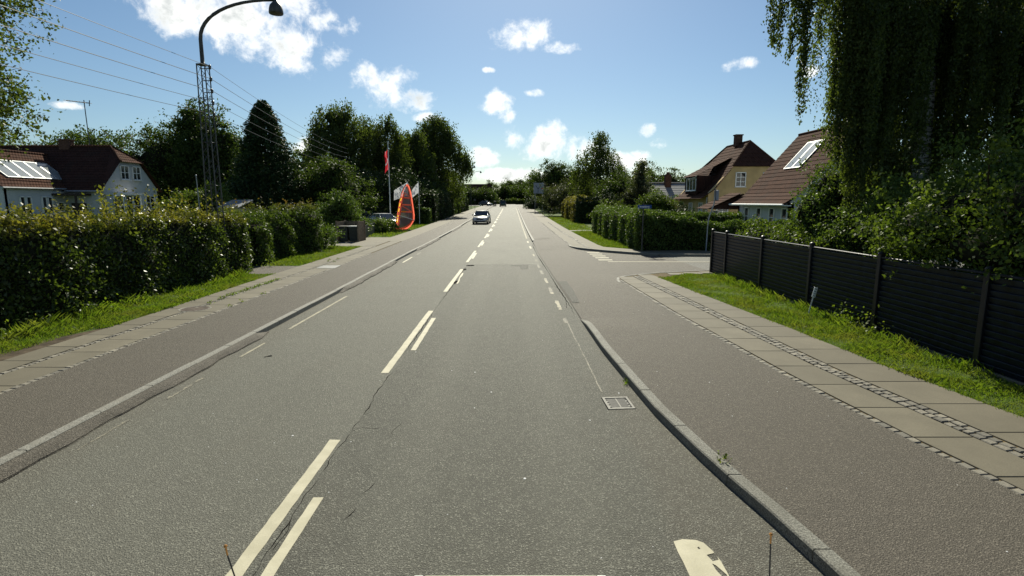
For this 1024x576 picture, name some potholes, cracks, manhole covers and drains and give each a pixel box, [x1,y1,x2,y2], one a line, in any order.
crack [253,376,388,576]
